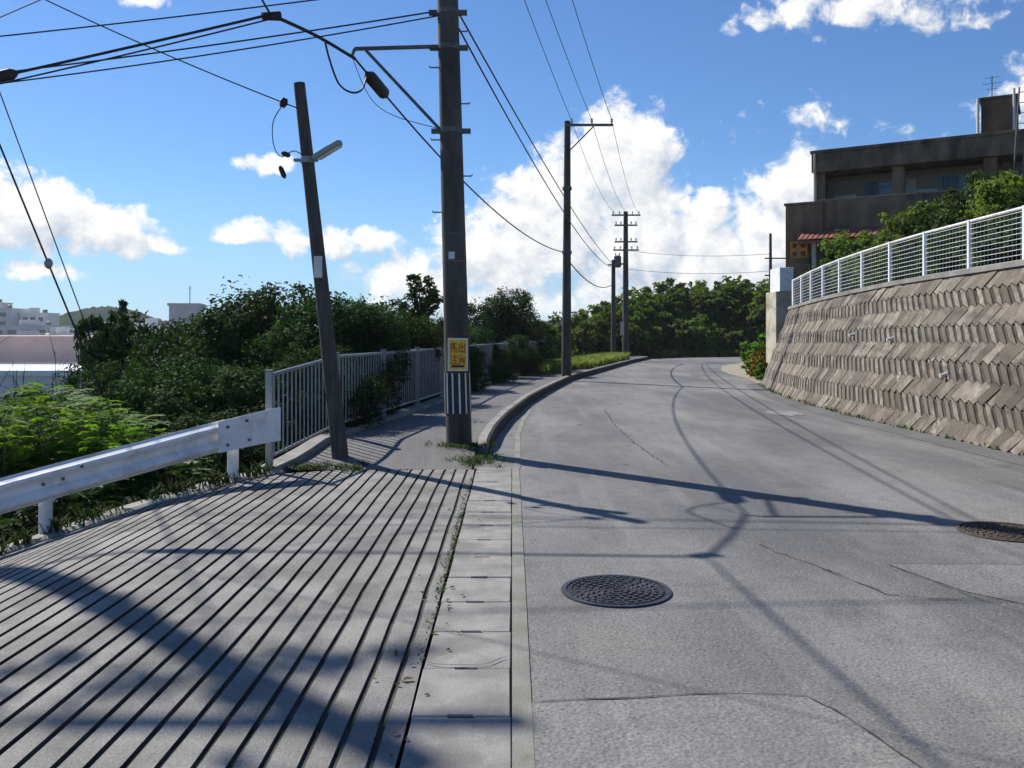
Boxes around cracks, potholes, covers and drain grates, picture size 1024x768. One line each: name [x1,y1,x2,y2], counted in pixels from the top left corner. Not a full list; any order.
manhole cover [955,521,1024,542]
manhole cover [561,574,672,608]
